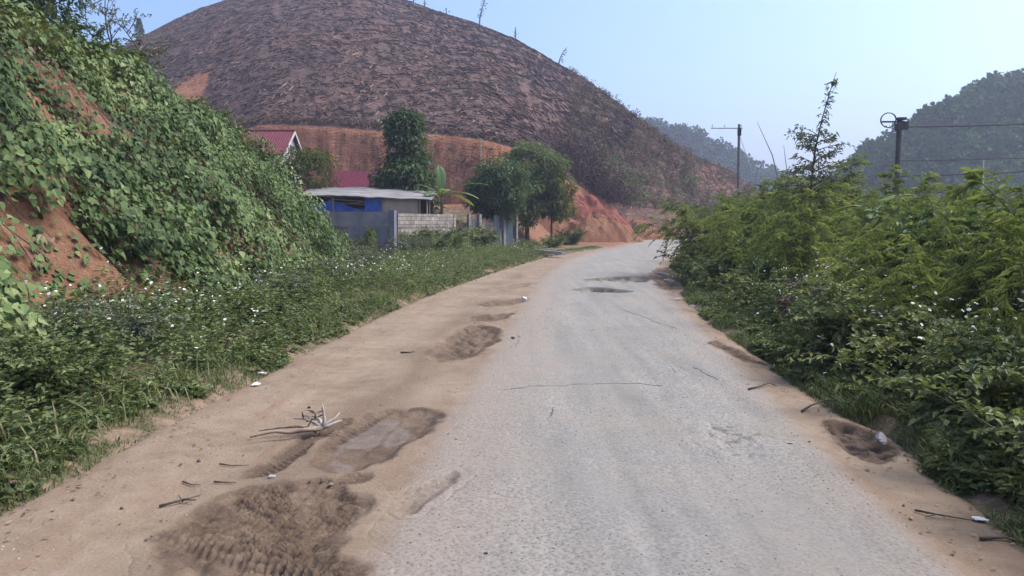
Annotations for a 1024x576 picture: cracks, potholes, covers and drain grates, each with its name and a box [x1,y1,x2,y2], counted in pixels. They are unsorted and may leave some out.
pothole [387,468,473,520]
pothole [798,416,918,472]
pothole [561,286,643,294]
pothole [287,404,460,476]
pothole [696,340,774,371]
pothole [409,323,516,367]
